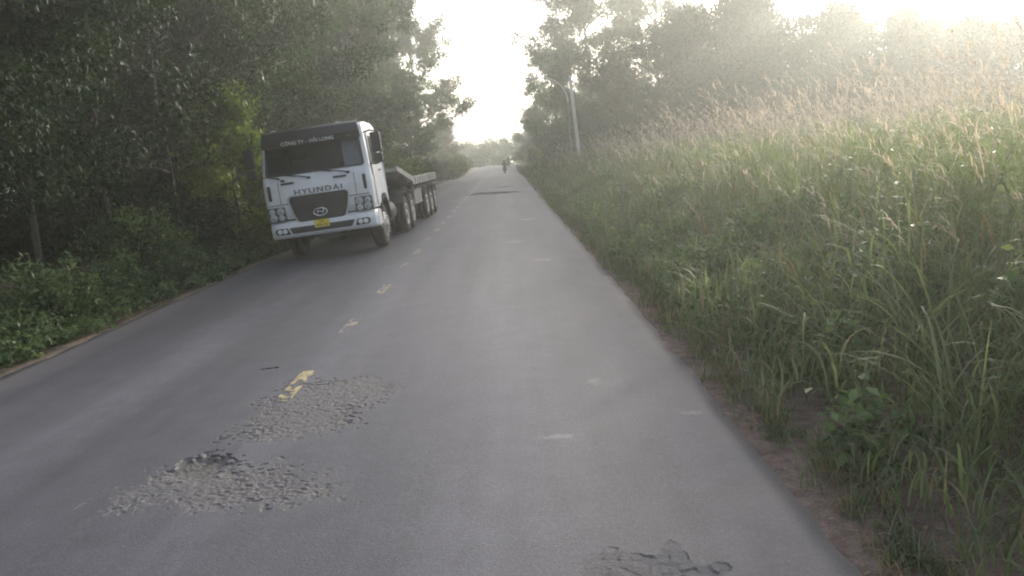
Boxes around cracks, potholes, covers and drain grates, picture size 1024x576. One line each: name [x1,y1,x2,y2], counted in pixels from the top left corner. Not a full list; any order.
pothole [74,448,365,526]
